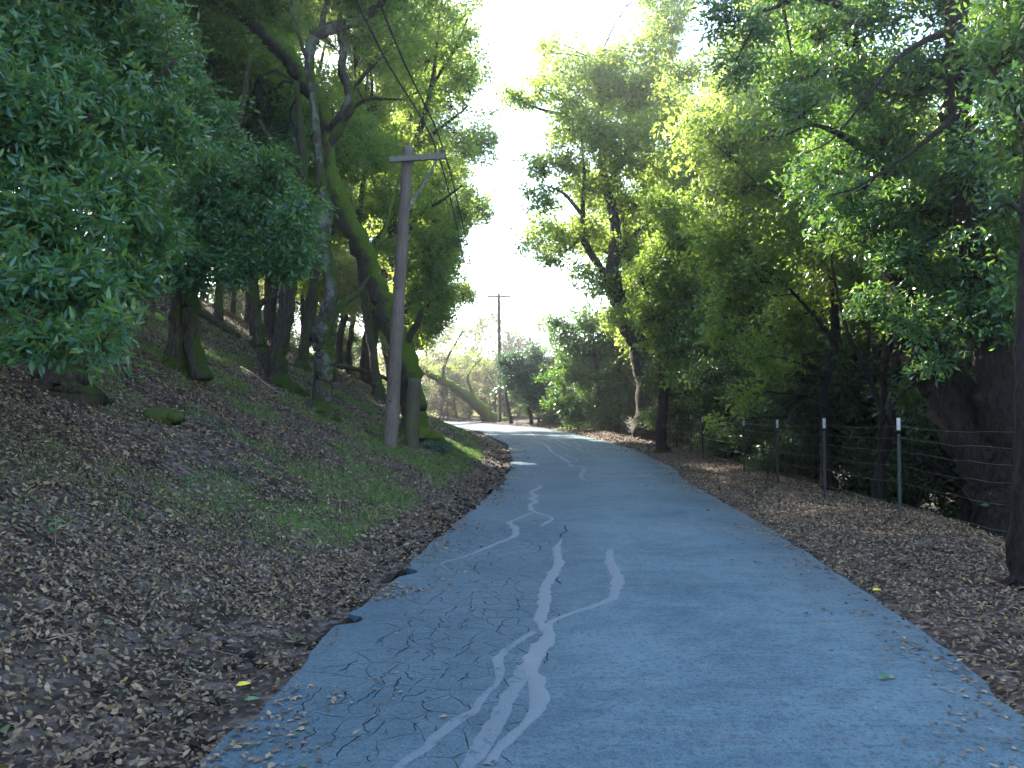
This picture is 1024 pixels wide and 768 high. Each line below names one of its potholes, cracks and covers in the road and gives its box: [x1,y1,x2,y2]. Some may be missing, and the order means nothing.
crack [295,528,562,768]
